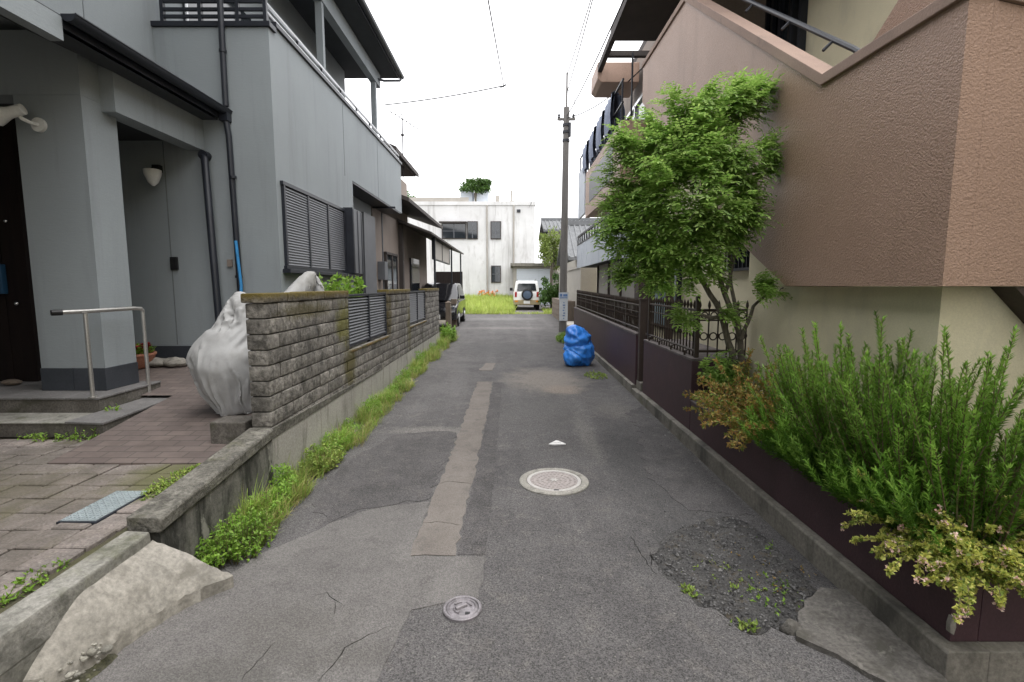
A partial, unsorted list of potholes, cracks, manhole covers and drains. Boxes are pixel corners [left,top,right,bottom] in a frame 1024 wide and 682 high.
manhole cover [443,595,482,623]
manhole cover [519,468,589,496]
pothole [649,516,817,635]
